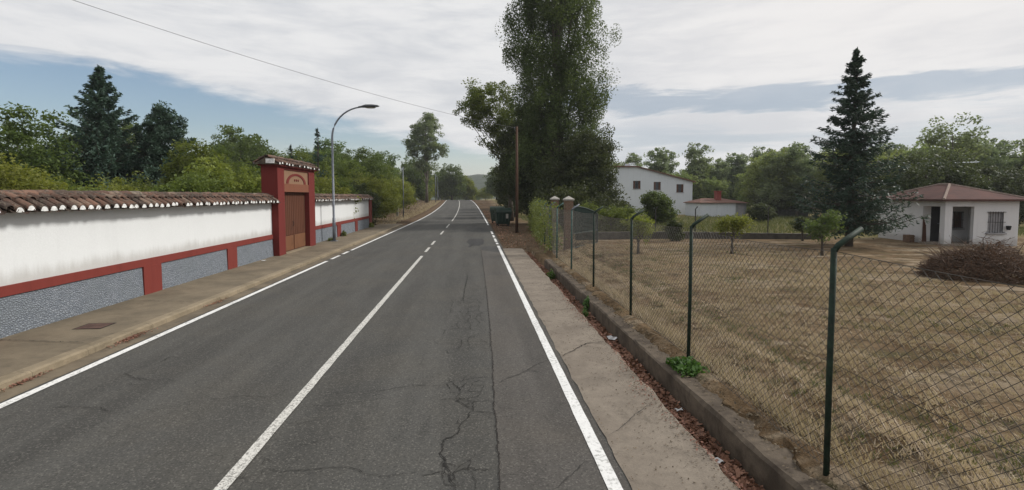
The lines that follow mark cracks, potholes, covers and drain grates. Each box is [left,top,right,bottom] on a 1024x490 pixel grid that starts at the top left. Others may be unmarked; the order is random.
crack [443,265,488,358]
crack [208,376,518,490]
